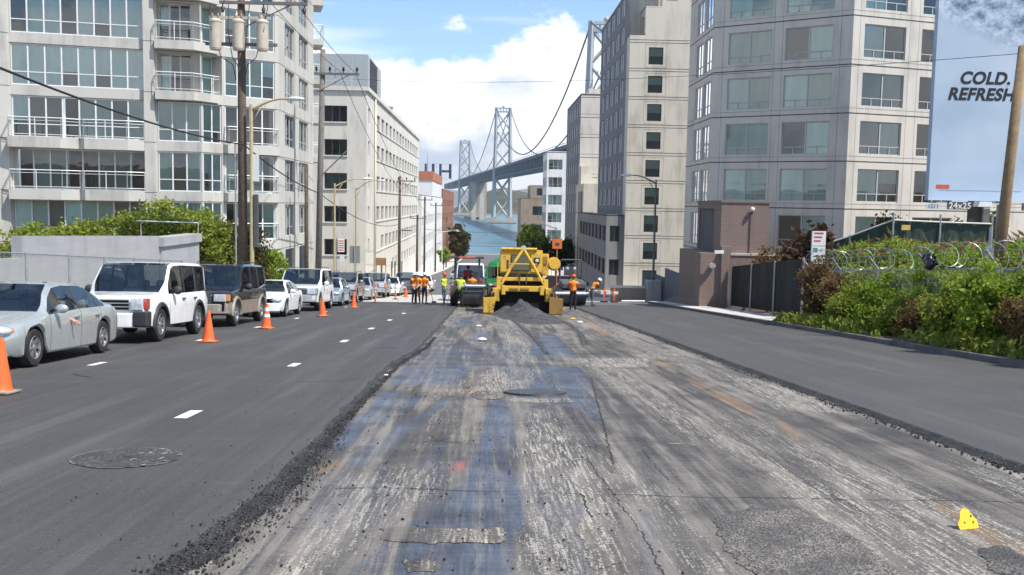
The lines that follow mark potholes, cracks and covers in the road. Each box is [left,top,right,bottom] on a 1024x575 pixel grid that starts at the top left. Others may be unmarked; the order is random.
manhole cover [504,389,567,397]
manhole cover [69,448,183,468]
crack [538,378,1004,575]
